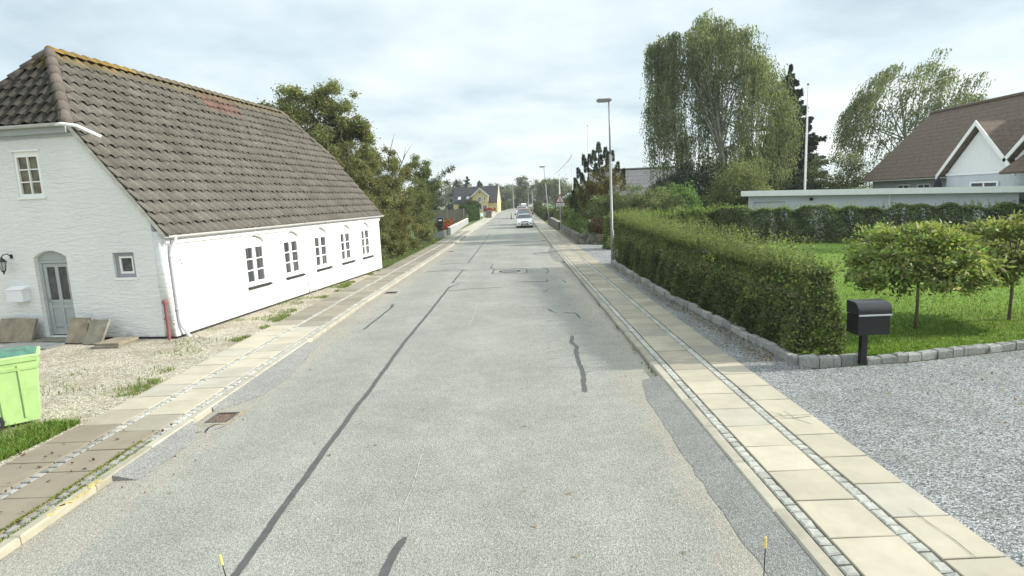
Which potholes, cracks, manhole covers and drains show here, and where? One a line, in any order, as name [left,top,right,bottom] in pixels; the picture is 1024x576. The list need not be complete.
drain grate [204,412,240,423]
crack [397,430,431,536]
